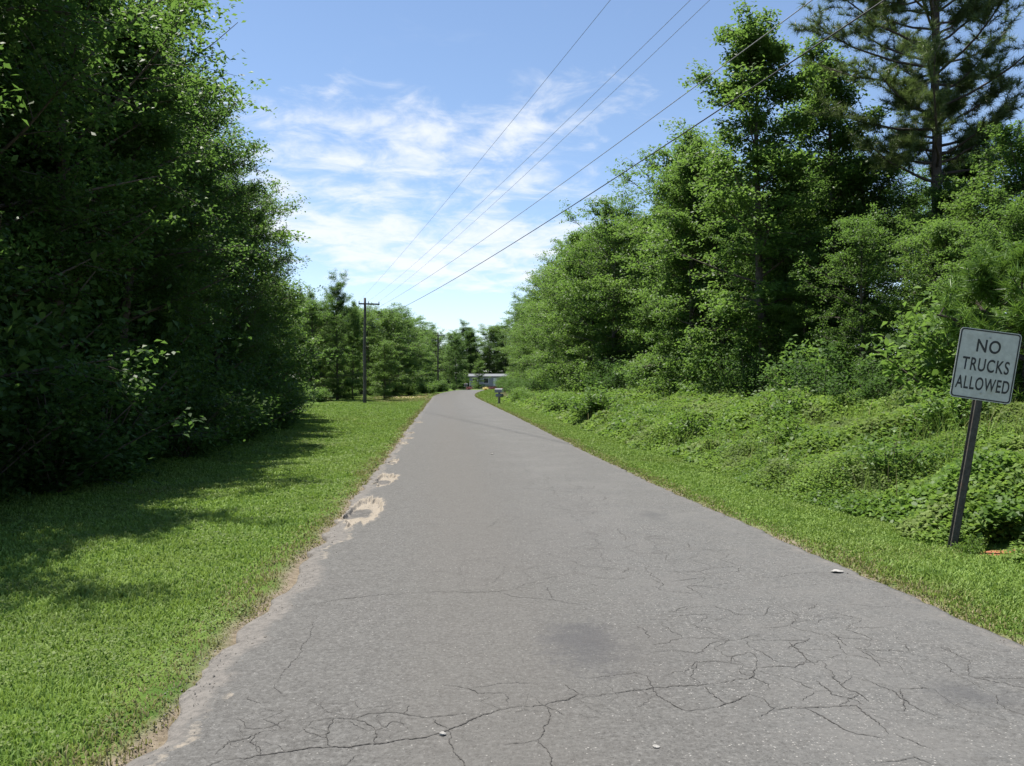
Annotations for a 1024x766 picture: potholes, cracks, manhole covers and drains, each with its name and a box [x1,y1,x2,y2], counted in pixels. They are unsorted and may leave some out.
pothole [338,495,384,529]
crack [207,469,1022,766]
pothole [372,473,399,487]
